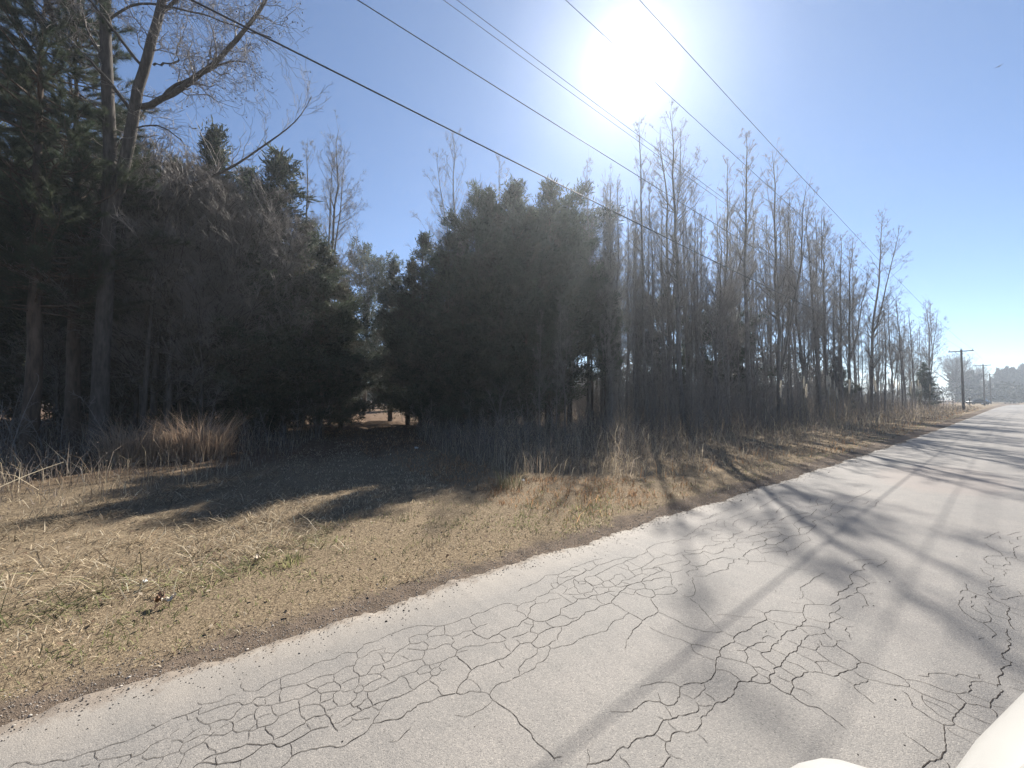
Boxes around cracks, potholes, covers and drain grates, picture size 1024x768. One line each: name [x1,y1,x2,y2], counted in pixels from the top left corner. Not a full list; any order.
crack [853,575,1024,767]
crack [10,490,869,767]
